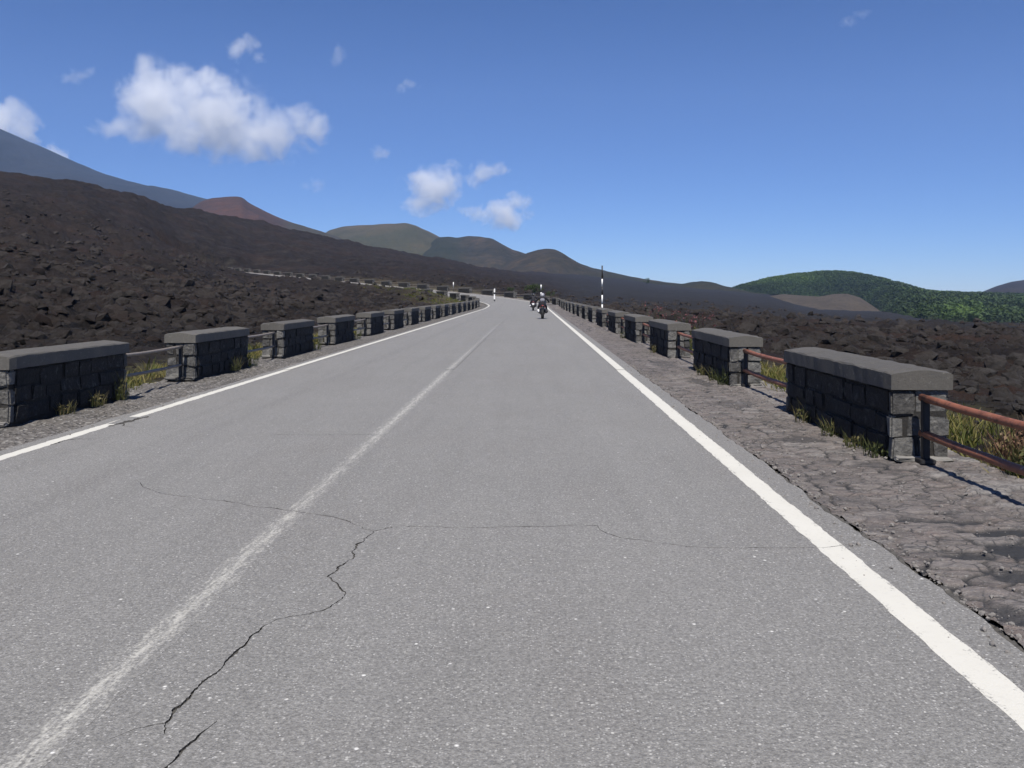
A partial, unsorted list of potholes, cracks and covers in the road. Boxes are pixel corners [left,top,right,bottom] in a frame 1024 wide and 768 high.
crack [109,416,149,428]
crack [114,482,834,768]
